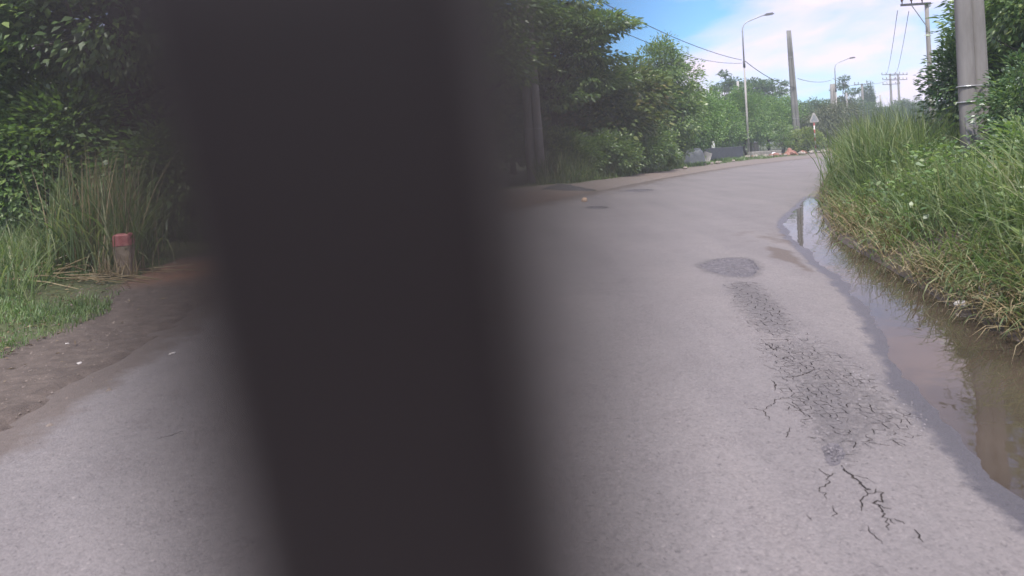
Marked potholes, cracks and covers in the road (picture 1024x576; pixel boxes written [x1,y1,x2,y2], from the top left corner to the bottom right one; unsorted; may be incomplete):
crack [723,282,802,335]
crack [751,333,924,544]
